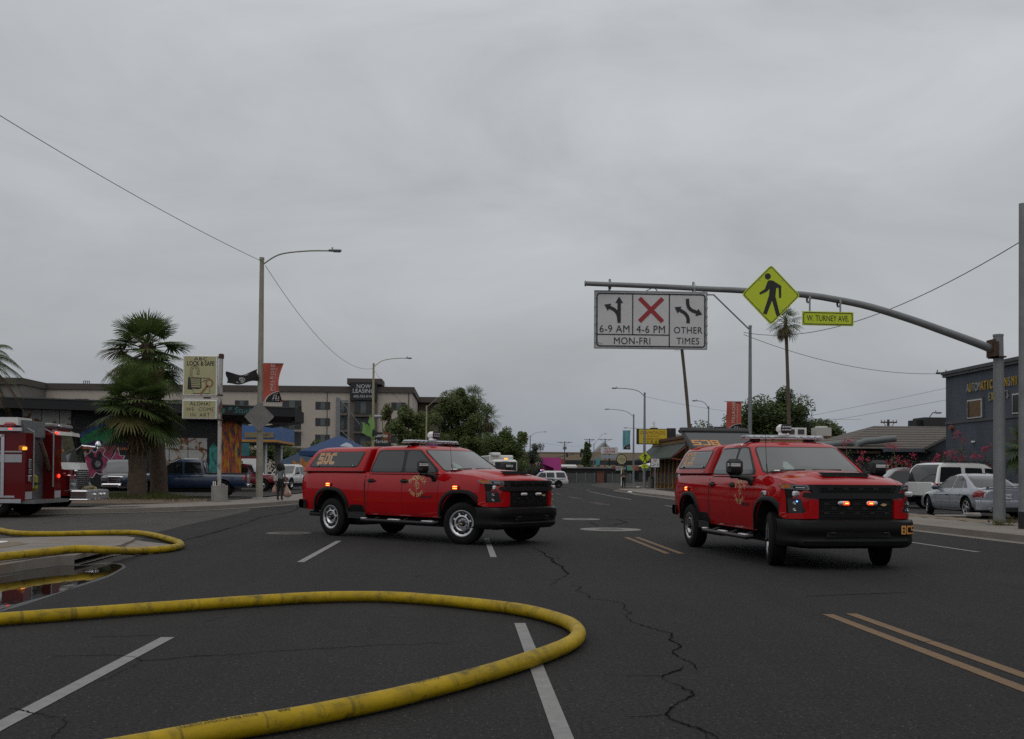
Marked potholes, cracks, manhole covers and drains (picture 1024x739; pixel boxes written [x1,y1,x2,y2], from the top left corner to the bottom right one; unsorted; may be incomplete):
crack [533,547,719,739]
